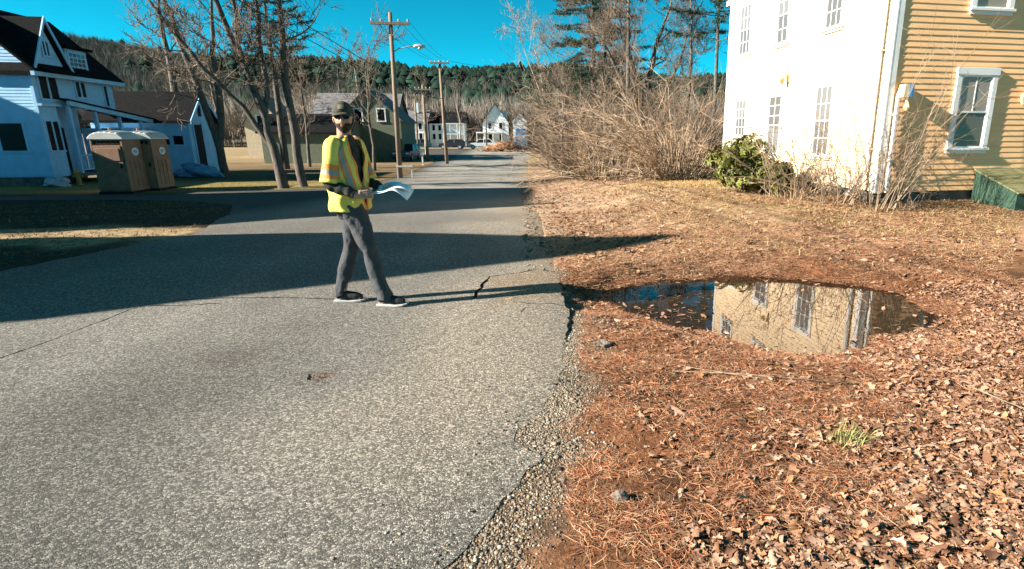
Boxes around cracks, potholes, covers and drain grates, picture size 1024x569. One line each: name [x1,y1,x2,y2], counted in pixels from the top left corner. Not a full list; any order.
crack [473,268,541,299]
